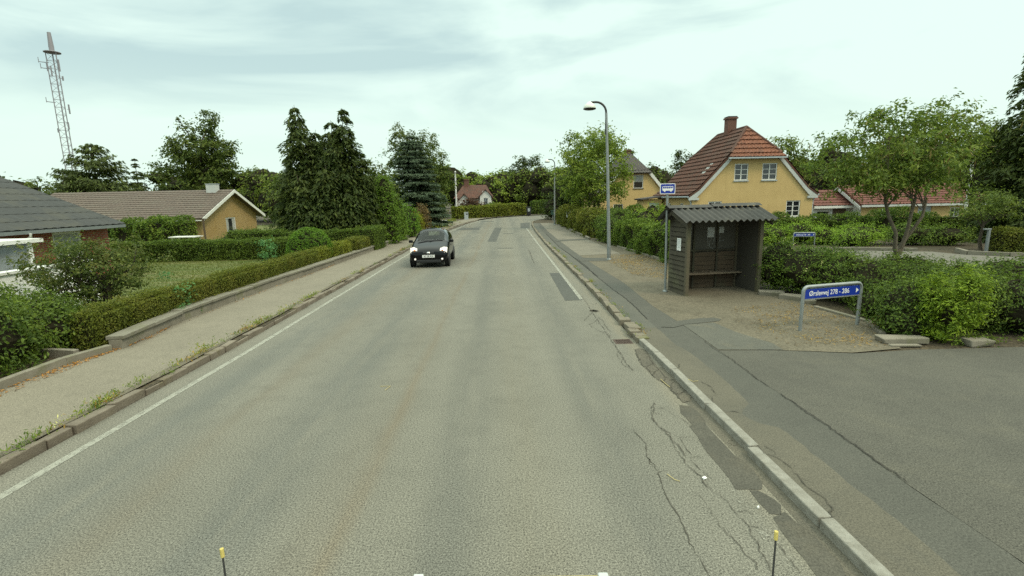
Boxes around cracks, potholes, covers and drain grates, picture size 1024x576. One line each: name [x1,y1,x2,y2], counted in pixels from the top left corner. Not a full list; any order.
crack [582,296,800,573]
crack [758,445,833,518]
